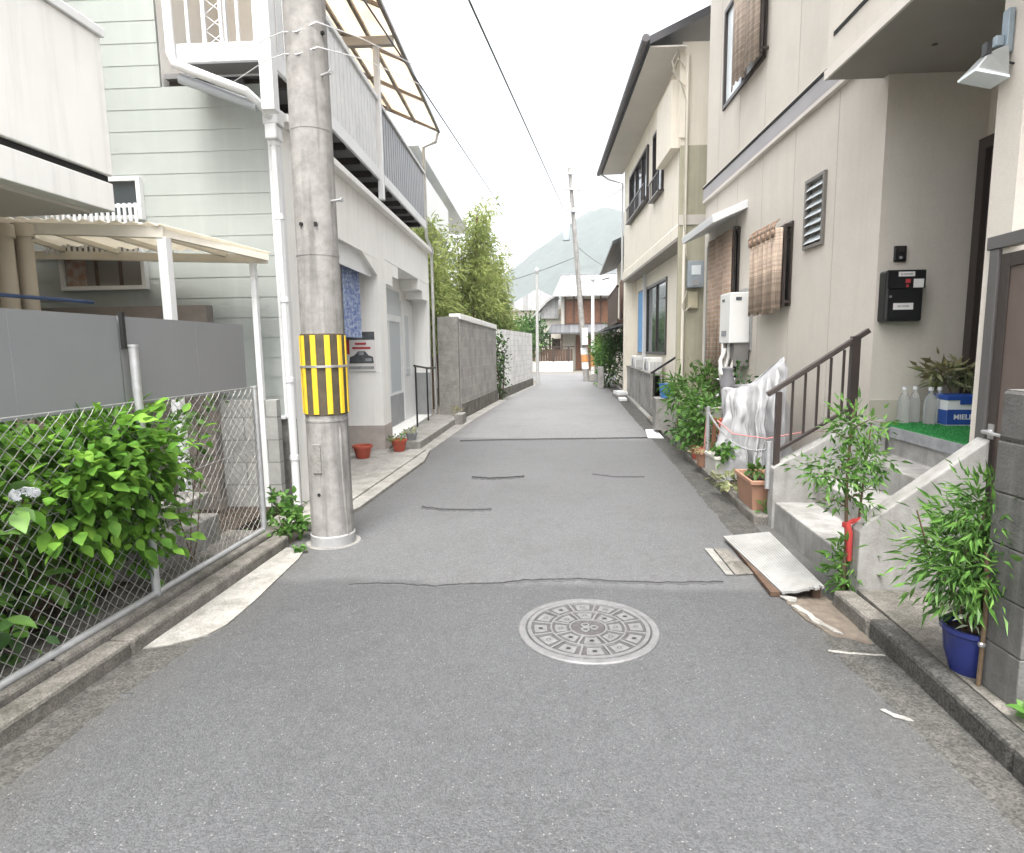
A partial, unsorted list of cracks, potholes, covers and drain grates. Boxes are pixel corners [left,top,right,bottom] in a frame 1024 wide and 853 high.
crack [347,577,724,589]
manhole cover [518,599,660,666]
